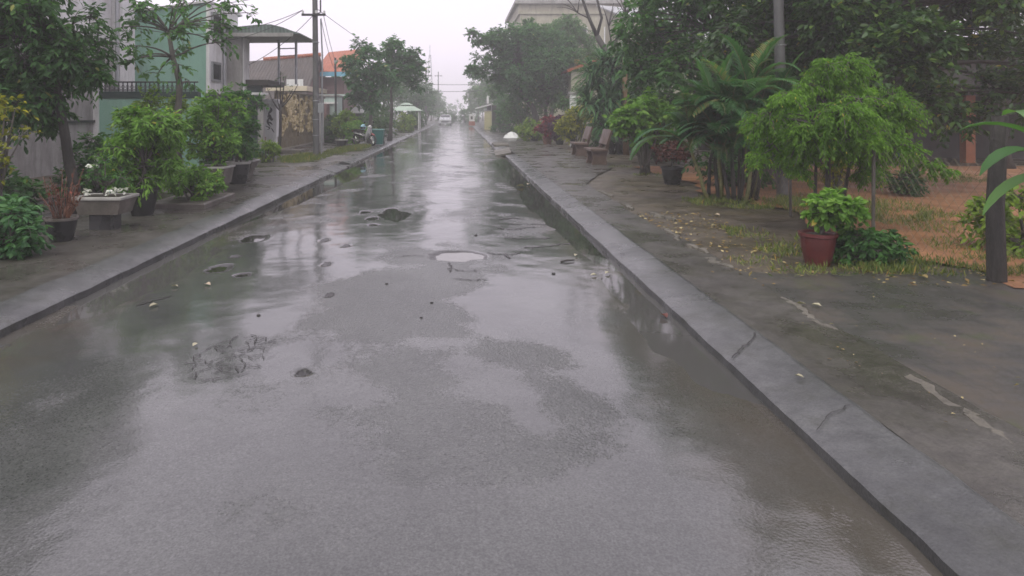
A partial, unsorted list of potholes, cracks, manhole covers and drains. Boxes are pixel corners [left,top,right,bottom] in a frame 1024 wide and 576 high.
pothole [239,234,269,243]
pothole [203,264,234,274]
